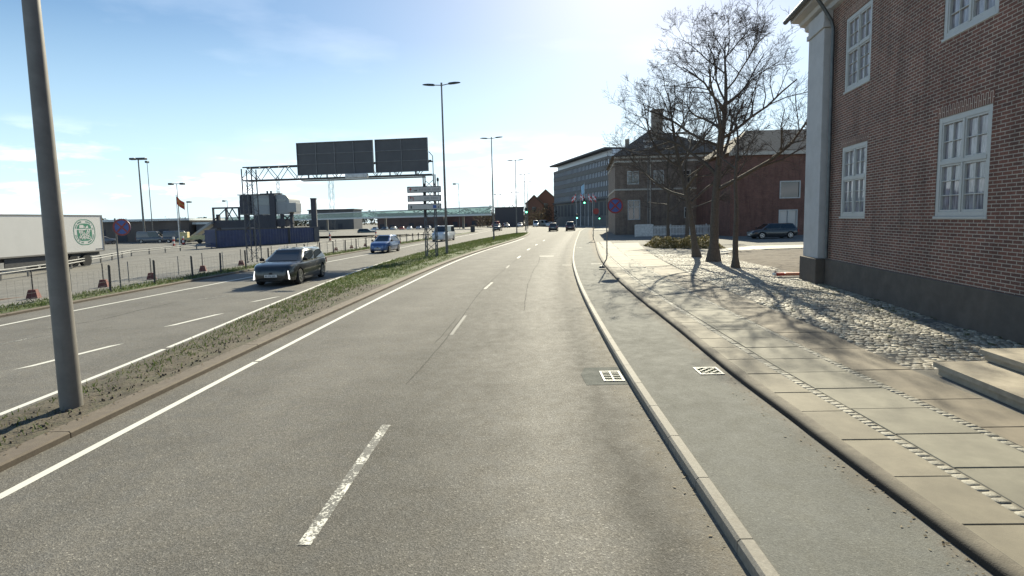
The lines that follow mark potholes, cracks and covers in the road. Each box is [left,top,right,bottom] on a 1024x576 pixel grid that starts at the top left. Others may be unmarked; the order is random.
drain grate [693,367,724,375]
drain grate [599,371,625,381]
